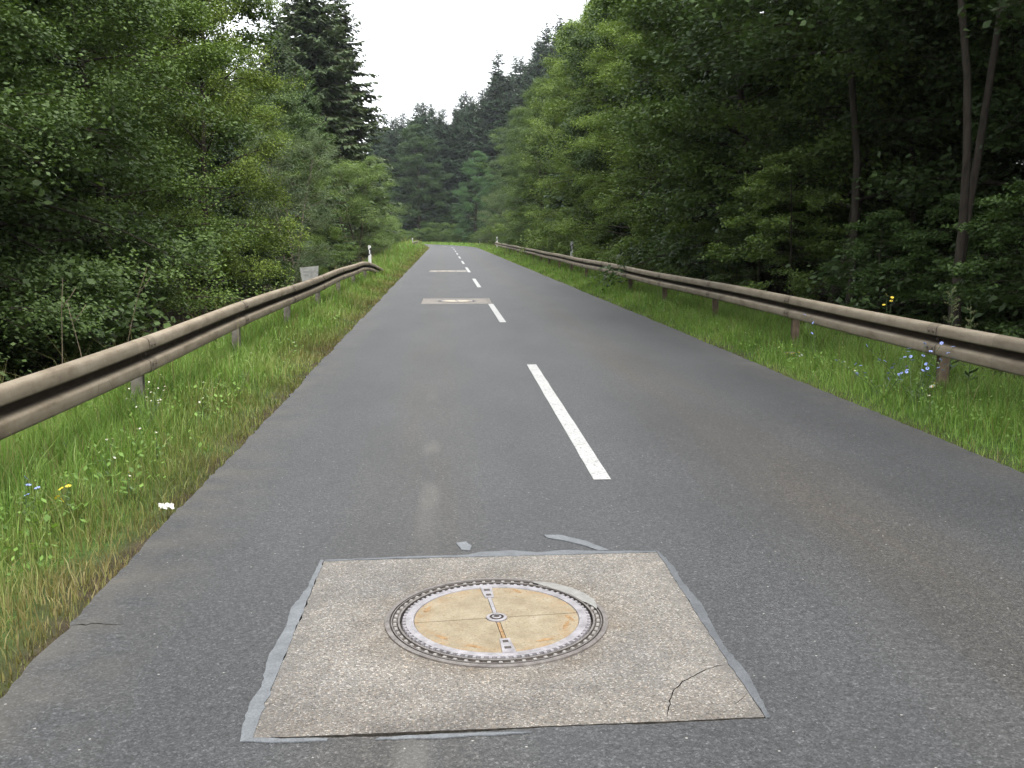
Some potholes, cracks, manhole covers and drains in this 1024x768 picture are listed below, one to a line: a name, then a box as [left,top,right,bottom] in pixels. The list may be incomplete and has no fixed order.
crack [667,665,744,715]
manhole cover [385,578,608,668]
